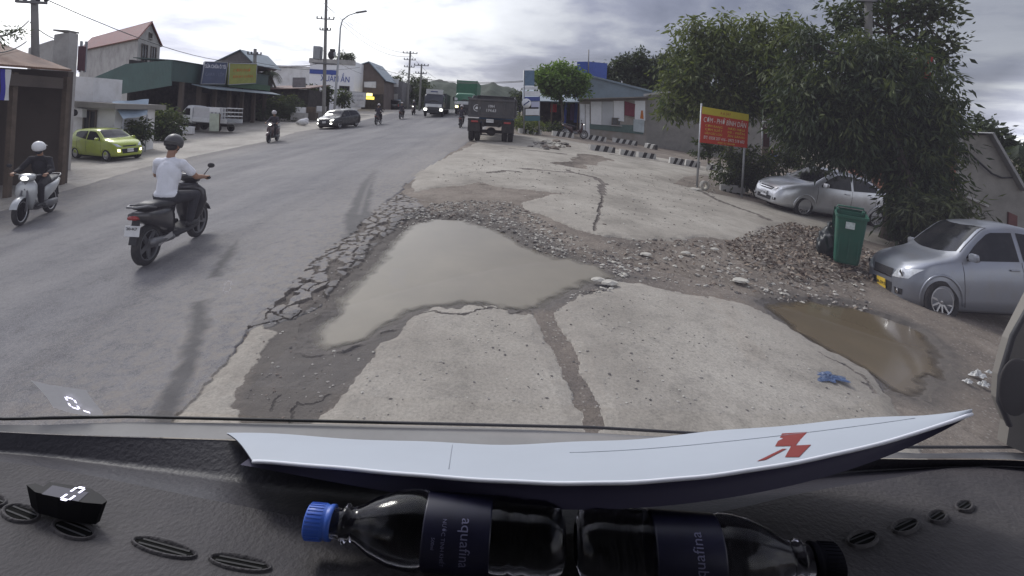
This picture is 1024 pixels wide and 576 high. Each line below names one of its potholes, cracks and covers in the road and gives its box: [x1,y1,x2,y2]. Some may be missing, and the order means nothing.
crack [269,394,331,424]
crack [247,193,499,329]
pothole [754,295,960,404]
pothole [292,213,622,358]
crack [486,148,702,185]
